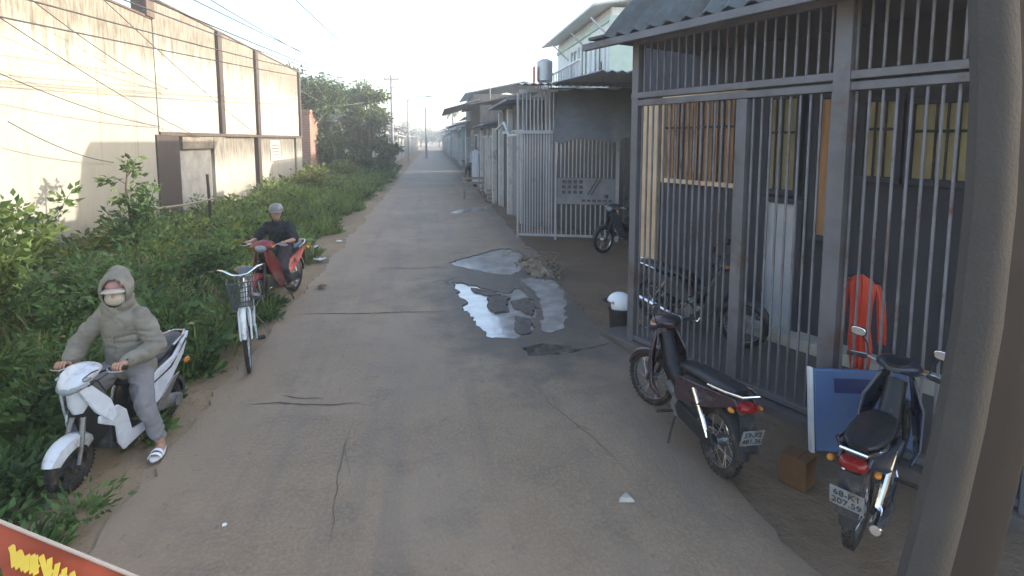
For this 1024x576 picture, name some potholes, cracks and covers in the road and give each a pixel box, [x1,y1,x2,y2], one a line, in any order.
crack [329,426,352,541]
pothole [522,343,582,356]
pothole [452,282,539,339]
